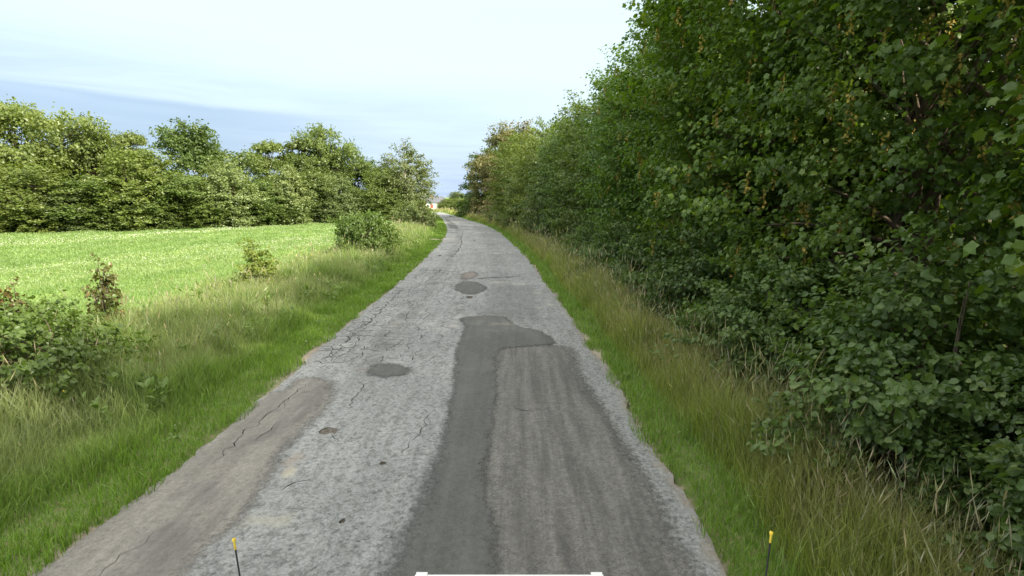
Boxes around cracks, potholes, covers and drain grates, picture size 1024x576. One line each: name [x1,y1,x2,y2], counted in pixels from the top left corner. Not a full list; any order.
crack [305,267,472,364]
